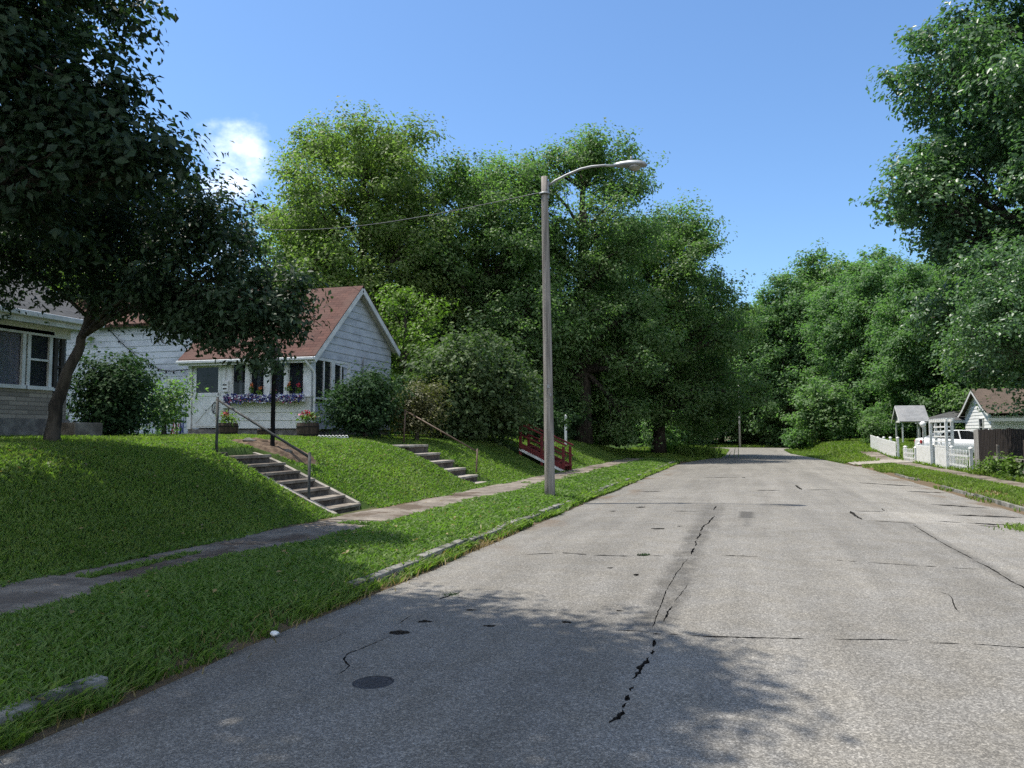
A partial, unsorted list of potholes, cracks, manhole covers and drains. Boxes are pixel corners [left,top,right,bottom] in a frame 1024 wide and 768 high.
crack [839,483,1024,588]
manhole cover [352,676,394,689]
crack [328,616,410,674]
crack [526,506,1024,723]
